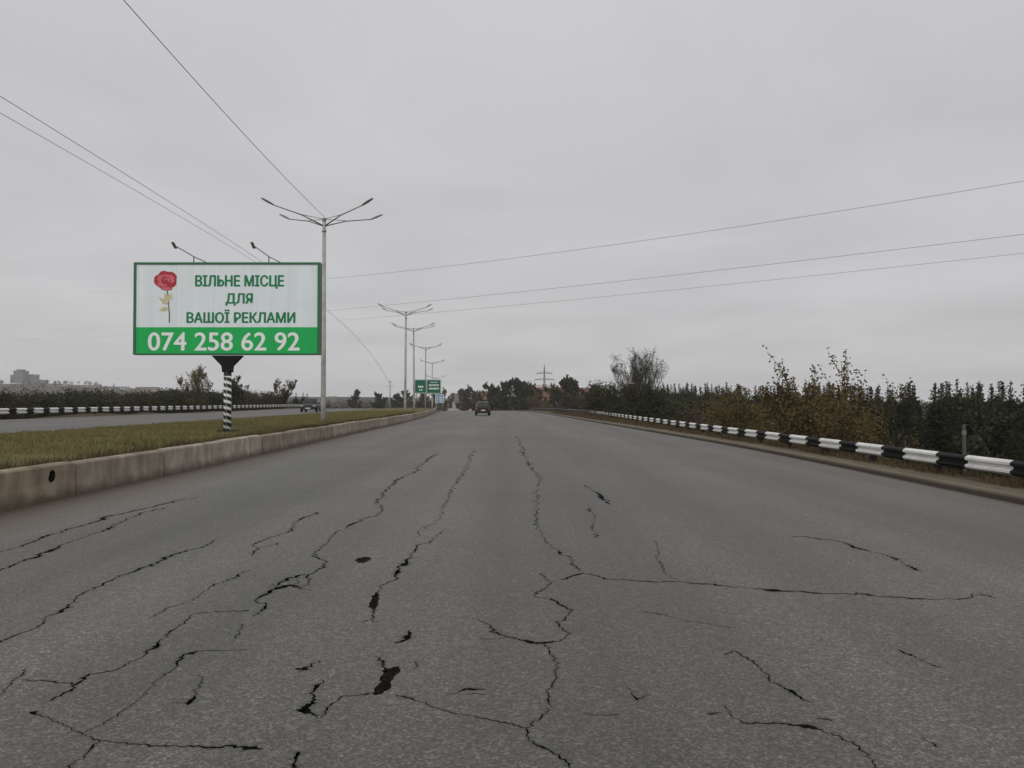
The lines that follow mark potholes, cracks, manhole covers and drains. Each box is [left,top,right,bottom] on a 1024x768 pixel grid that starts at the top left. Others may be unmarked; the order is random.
pothole [372,666,401,695]
pothole [368,592,380,609]
crack [0,453,437,768]
crack [396,574,573,768]
crack [708,650,876,768]
crack [515,436,993,600]
